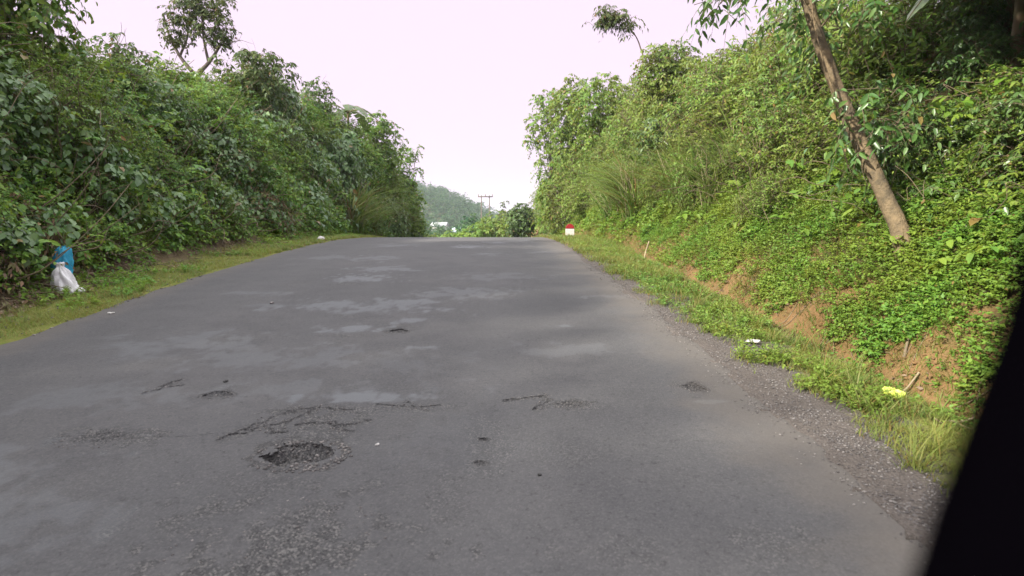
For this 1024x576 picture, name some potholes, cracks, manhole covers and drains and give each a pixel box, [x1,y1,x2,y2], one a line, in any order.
pothole [240,435,354,474]
pothole [196,389,238,400]
crack [500,394,557,410]
crack [128,401,442,442]
pothole [678,381,711,394]
crack [140,378,186,395]
